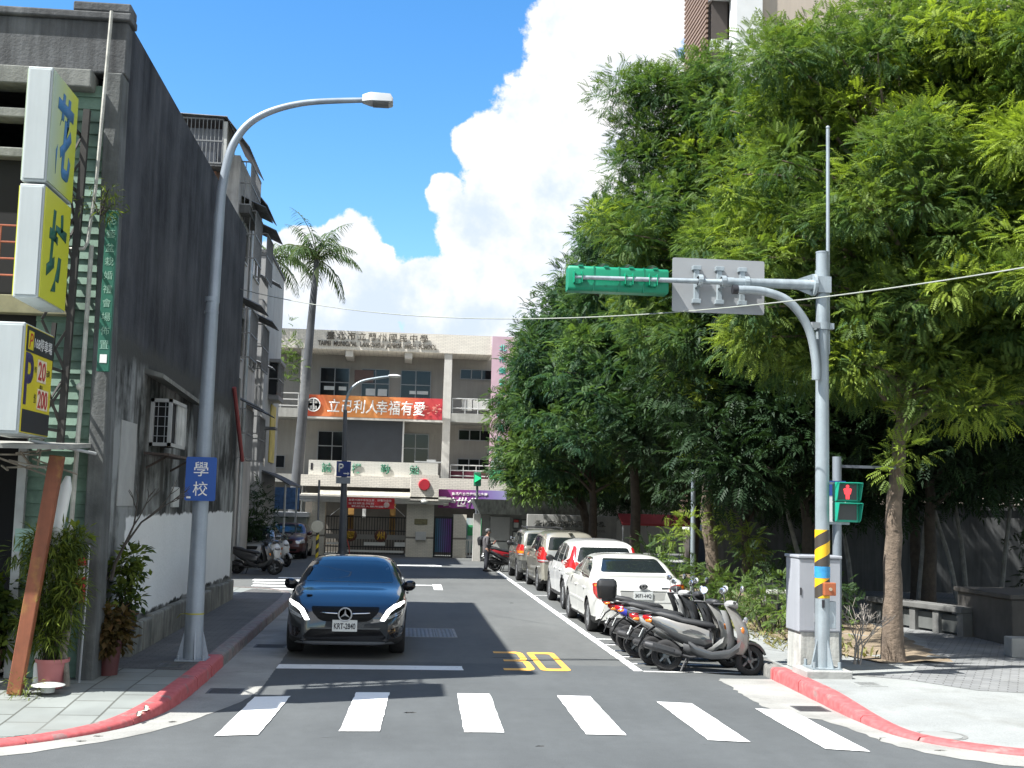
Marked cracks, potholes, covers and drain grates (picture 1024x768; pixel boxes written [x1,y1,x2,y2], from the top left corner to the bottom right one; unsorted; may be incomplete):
manhole cover [917,731,968,740]
